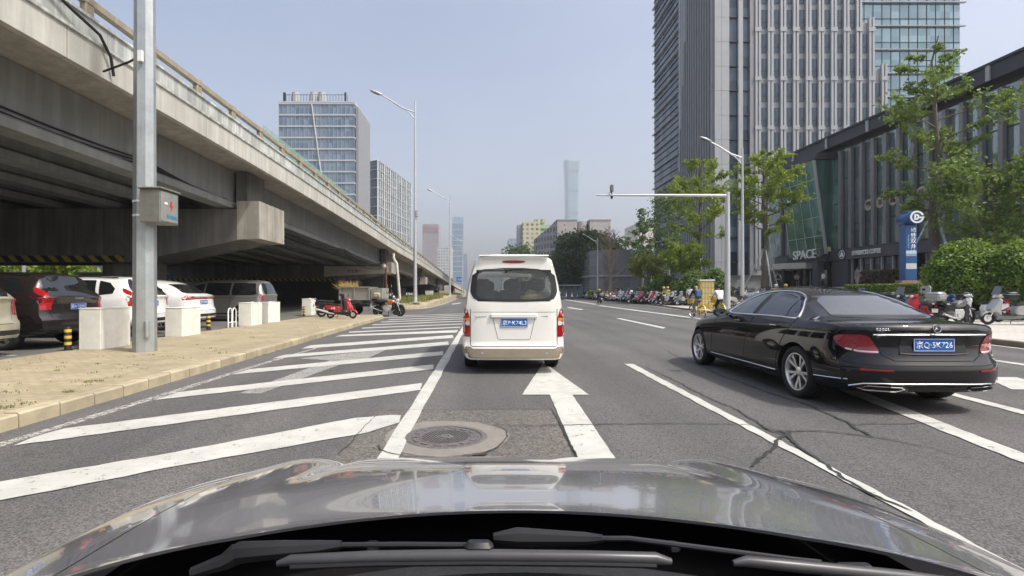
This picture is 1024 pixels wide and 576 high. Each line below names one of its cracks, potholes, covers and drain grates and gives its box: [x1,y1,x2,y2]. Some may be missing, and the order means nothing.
crack [339,411,508,457]
manhole cover [384,421,510,457]
